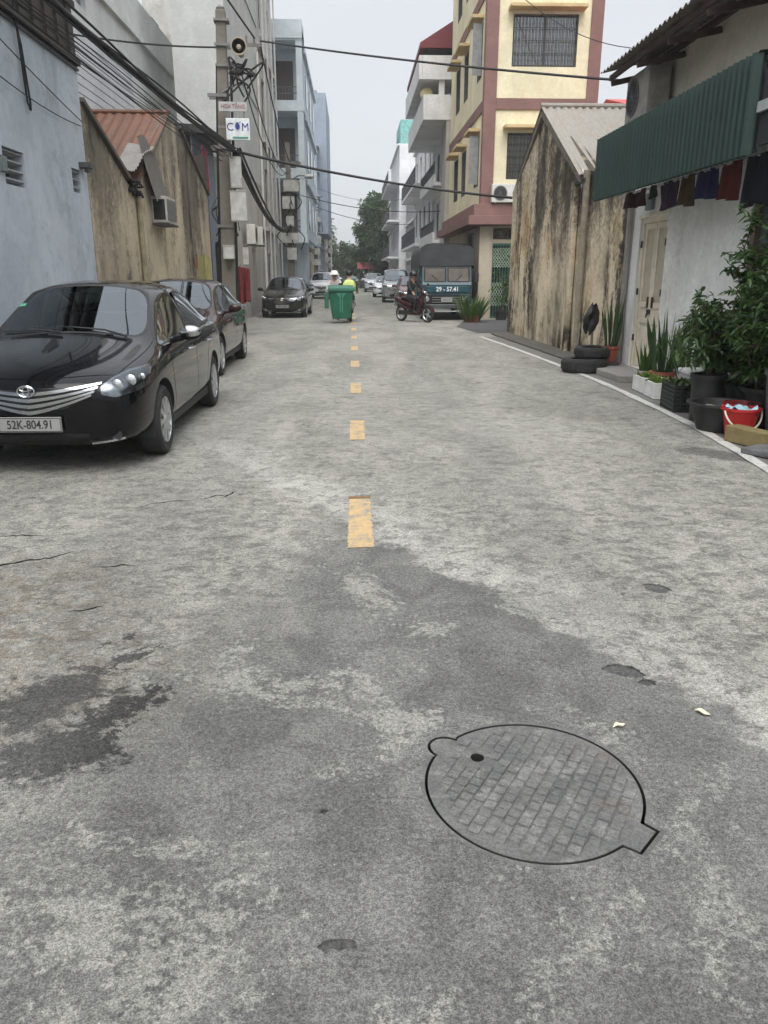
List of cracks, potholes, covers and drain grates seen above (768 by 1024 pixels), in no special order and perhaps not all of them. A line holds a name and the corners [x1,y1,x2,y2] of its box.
pothole [643,583,672,593]
pothole [601,664,646,678]
crack [0,552,71,566]
manhole cover [420,722,667,869]
pothole [317,937,358,954]
